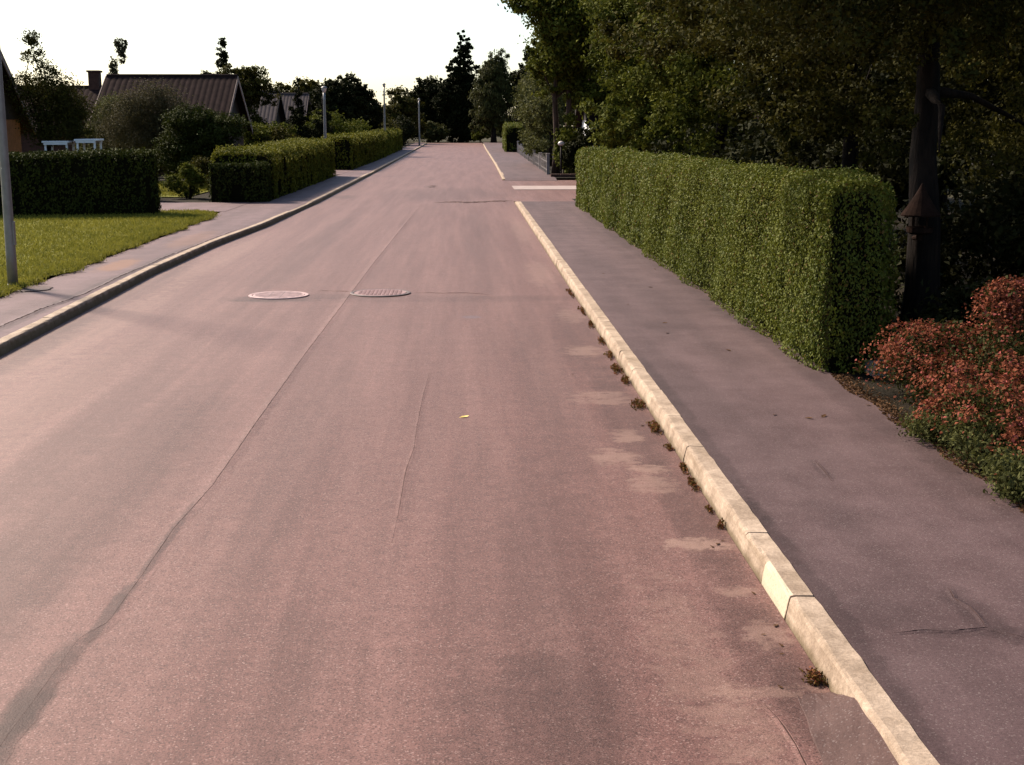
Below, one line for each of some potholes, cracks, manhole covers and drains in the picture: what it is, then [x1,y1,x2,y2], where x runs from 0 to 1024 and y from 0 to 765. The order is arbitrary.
manhole cover [350,289,411,297]
crack [757,703,812,765]
crack [0,185,511,765]
manhole cover [248,291,309,300]
crack [889,587,1024,640]
